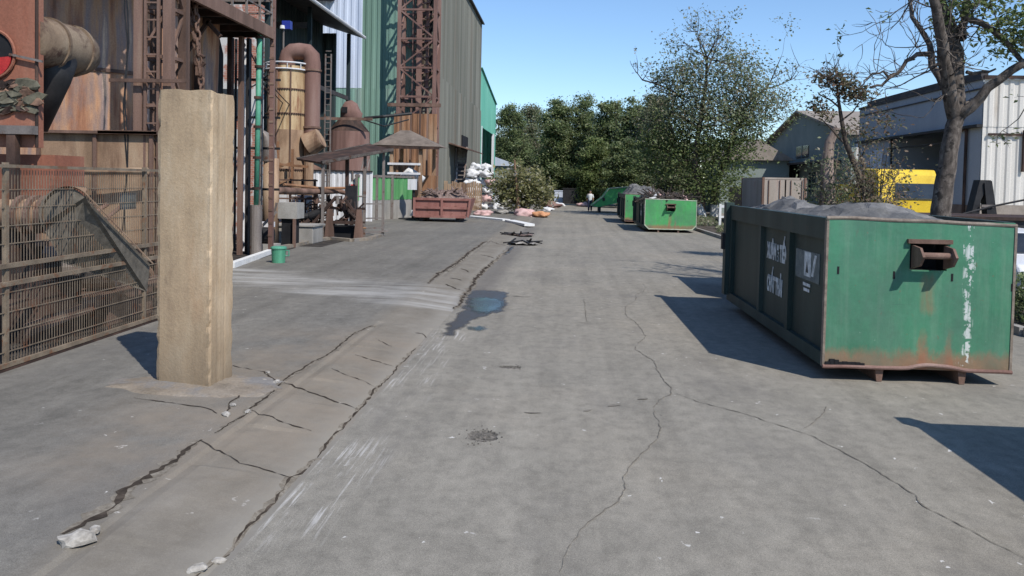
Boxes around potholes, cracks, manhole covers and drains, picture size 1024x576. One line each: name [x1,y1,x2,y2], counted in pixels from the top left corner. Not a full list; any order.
crack [427,241,523,309]
crack [60,325,429,576]
pothole [458,425,503,446]
crack [525,281,672,572]
crack [679,394,1023,557]
